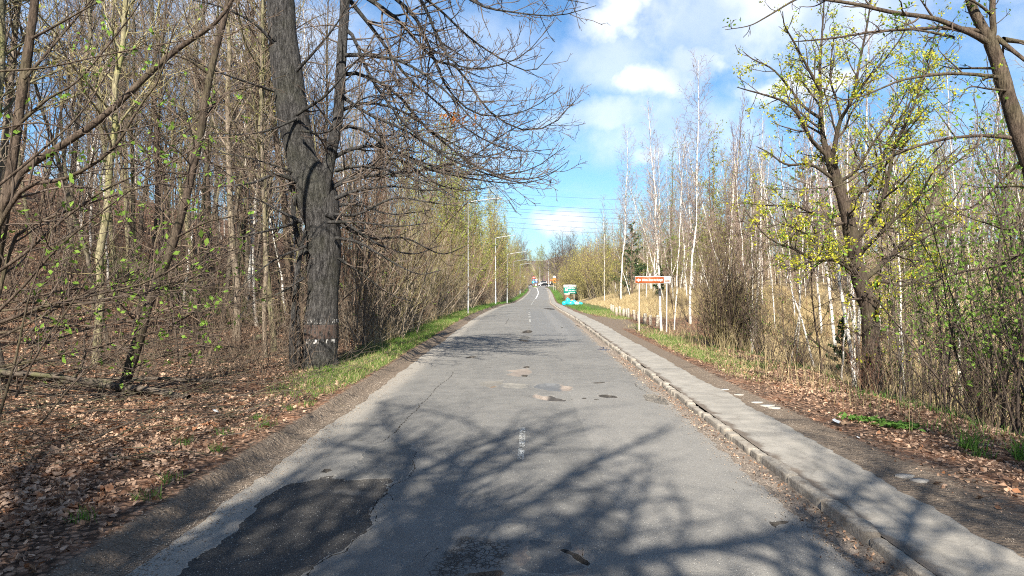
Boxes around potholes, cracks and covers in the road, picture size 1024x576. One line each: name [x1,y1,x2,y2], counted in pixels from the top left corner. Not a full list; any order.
pothole [560,549,590,566]
